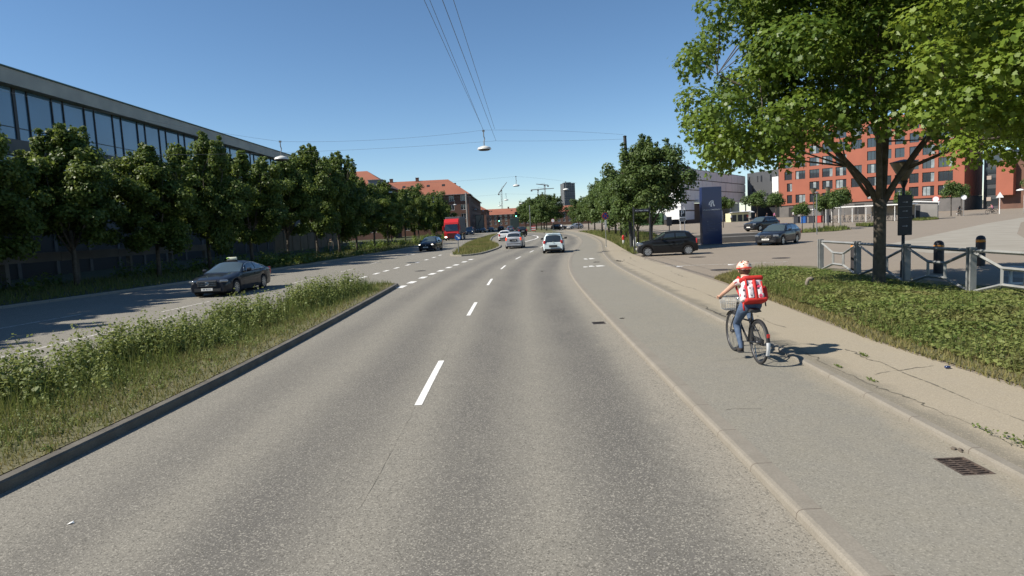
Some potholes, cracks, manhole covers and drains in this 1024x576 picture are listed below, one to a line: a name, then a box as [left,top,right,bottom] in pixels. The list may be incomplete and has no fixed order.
drain grate [933,457,996,476]
